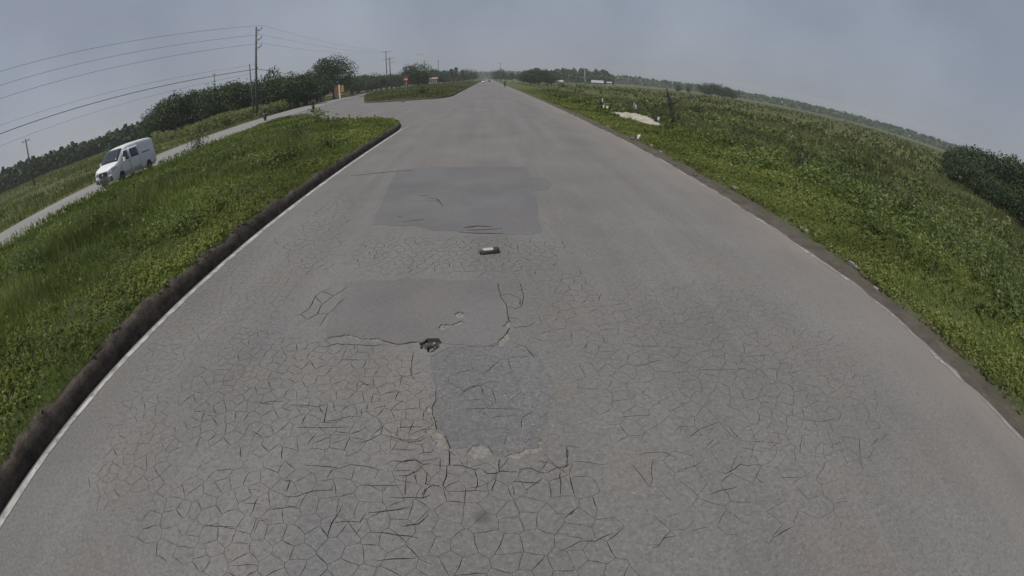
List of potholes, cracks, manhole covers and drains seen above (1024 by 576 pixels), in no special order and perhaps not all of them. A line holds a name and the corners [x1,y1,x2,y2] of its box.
crack [130,427,640,576]
crack [445,270,602,444]
crack [269,192,355,275]
pothole [419,338,442,353]
crack [560,280,893,551]
crack [345,195,565,275]
crack [85,246,312,512]
crack [178,287,454,459]
